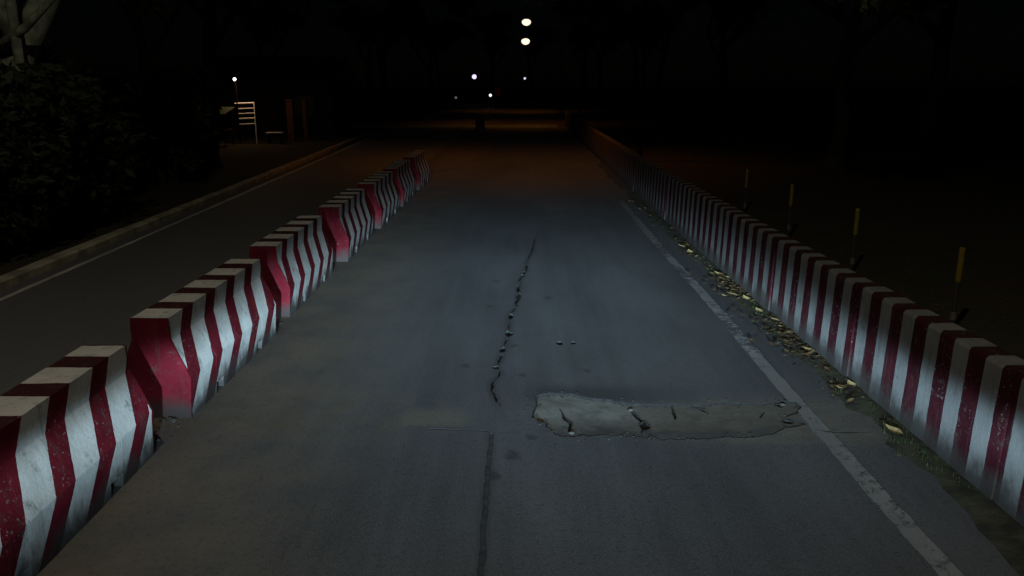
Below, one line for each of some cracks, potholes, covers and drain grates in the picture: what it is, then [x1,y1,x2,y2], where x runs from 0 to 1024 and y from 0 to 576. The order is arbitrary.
crack [490,234,537,407]
